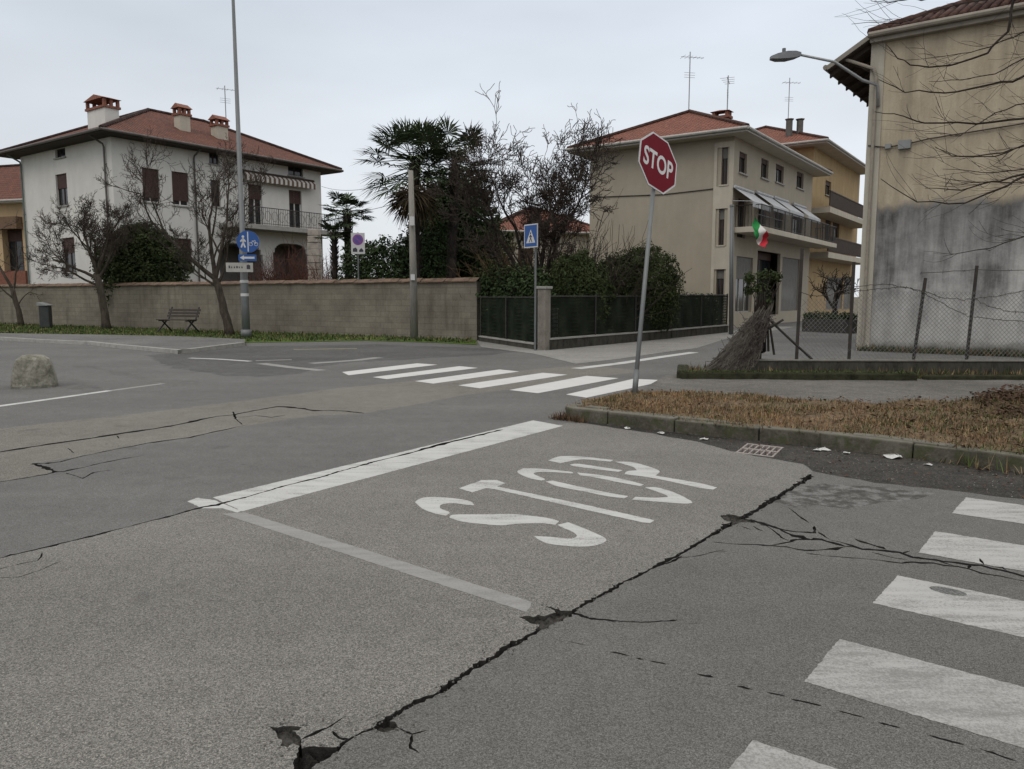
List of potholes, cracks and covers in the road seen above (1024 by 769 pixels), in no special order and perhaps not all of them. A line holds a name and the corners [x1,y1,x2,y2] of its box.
pothole [293,743,346,769]
pothole [269,726,301,753]
crack [681,507,1024,581]
crack [0,406,361,482]
pothole [375,721,398,732]
drain grate [735,443,783,457]
